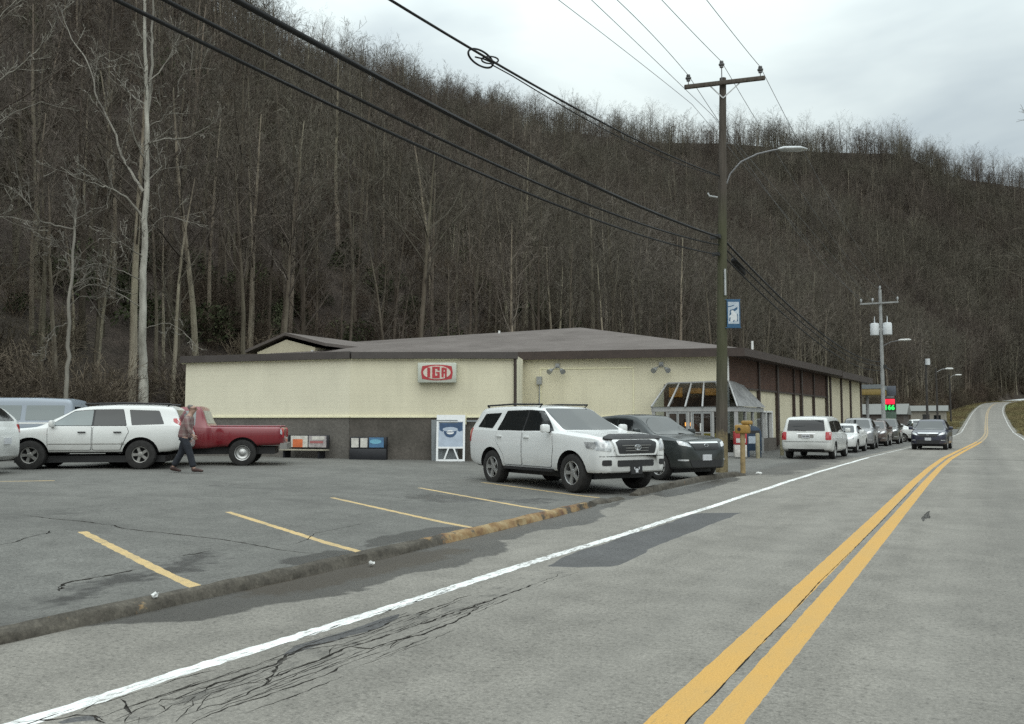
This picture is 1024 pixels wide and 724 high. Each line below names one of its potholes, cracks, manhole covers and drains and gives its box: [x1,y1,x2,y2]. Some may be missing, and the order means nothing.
crack [1,514,382,557]
crack [18,570,584,724]
